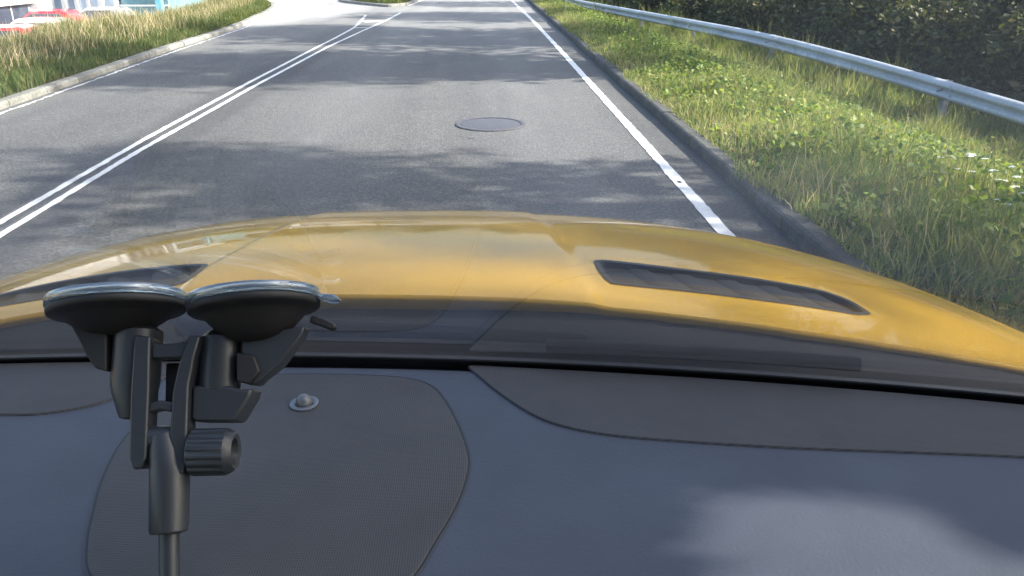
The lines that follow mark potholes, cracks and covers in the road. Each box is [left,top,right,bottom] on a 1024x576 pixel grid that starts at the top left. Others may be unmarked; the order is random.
manhole cover [455,117,526,131]
